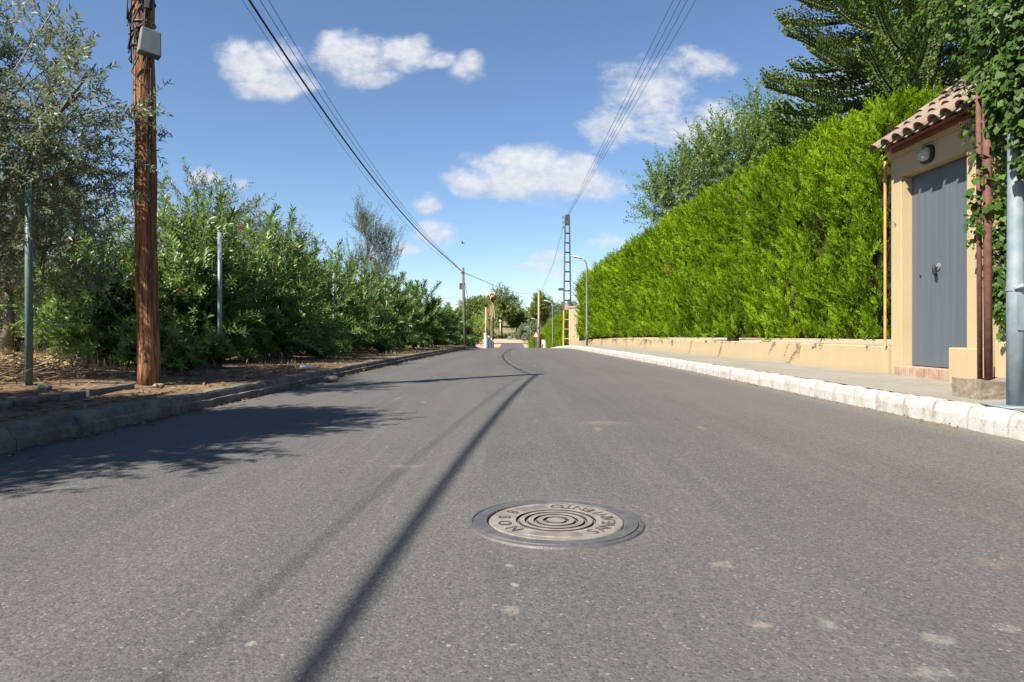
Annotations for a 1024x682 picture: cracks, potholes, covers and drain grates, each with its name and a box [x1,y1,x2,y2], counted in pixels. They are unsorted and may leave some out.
manhole cover [468,499,645,550]
